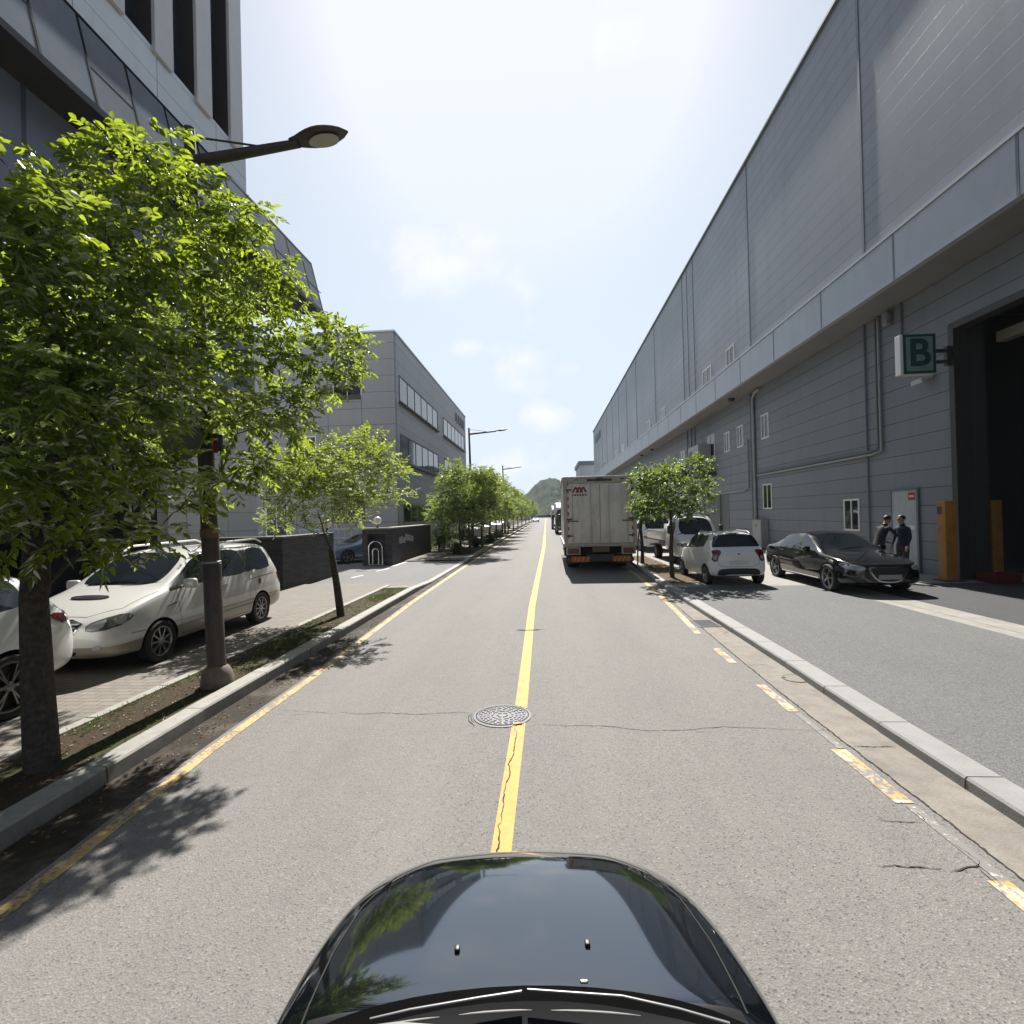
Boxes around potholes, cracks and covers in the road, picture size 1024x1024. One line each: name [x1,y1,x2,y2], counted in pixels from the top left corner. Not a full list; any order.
crack [295,710,475,726]
crack [496,728,517,852]
crack [884,845,997,884]
crack [537,724,799,732]
manhole cover [473,704,531,728]
